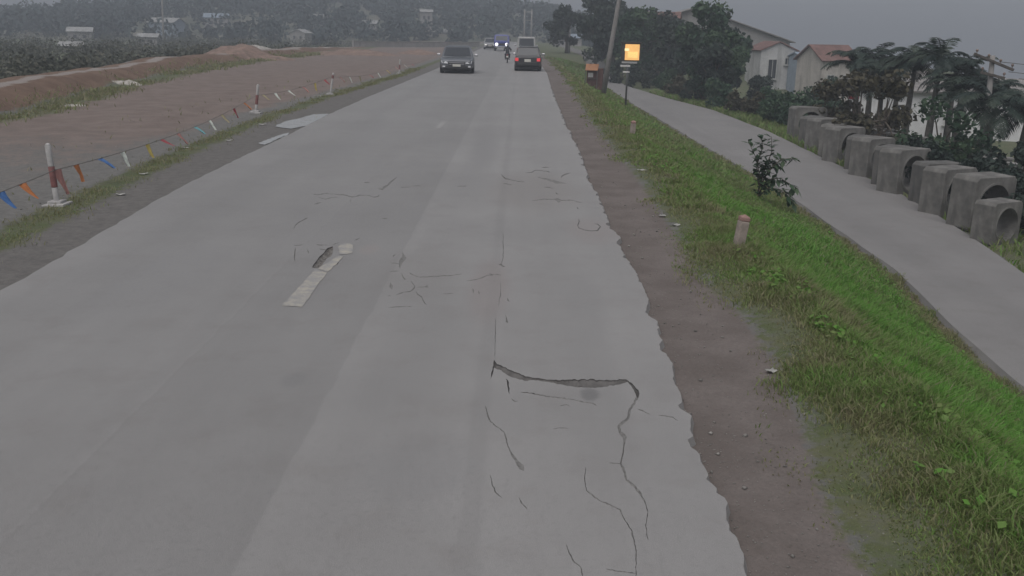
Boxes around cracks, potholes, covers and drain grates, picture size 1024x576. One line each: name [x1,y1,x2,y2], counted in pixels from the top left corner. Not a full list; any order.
crack [294,179,405,265]
crack [458,167,601,231]
crack [388,236,510,342]
crack [485,361,676,576]
pothole [312,247,333,268]
